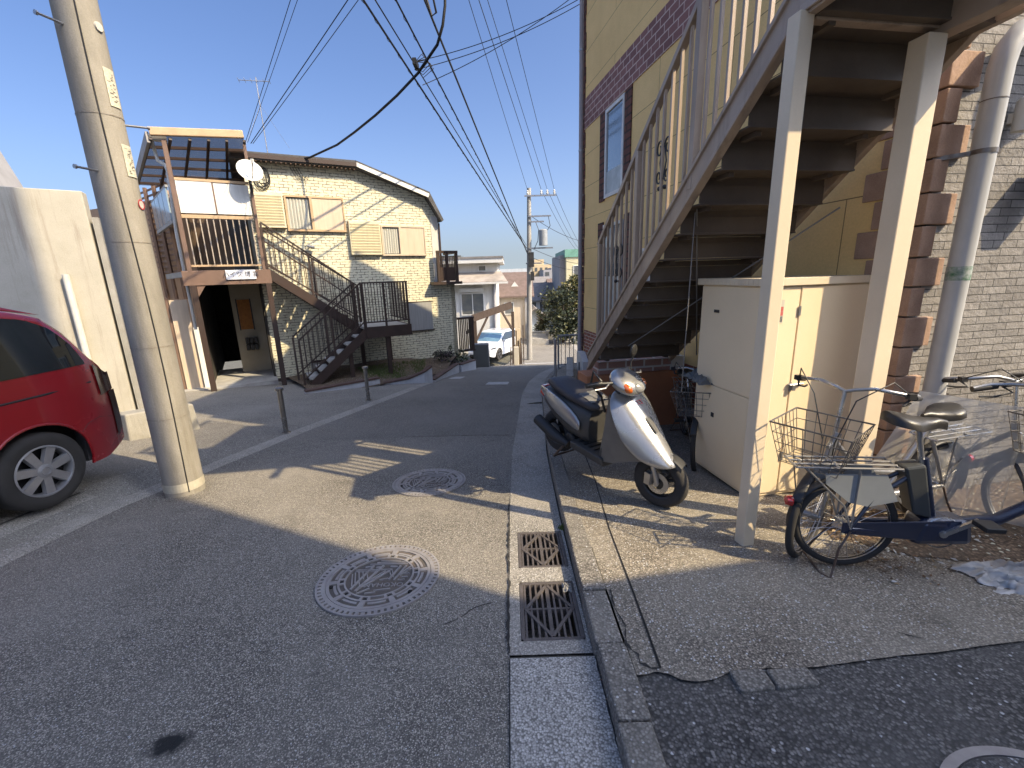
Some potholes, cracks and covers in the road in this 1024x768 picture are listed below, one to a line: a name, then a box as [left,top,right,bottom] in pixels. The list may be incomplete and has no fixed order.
crack [445,504,511,653]
drain grate [519,581,585,641]
drain grate [518,531,568,568]
manhole cover [392,468,466,497]
crack [626,643,661,669]
manhole cover [315,545,440,618]
